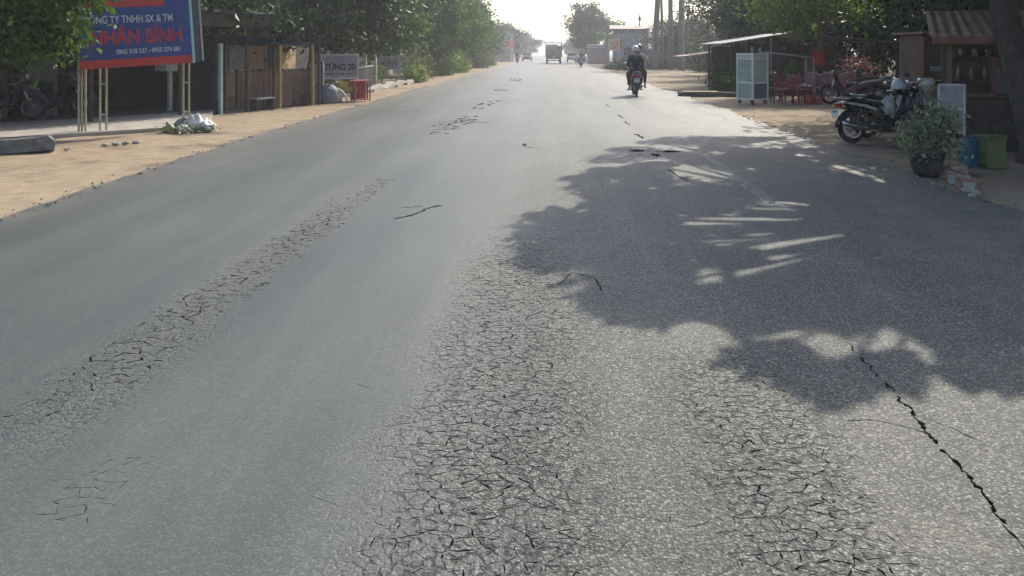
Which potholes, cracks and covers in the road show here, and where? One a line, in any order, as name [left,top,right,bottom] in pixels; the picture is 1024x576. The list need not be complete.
crack [35,457,149,523]
crack [393,205,443,219]
crack [312,228,729,576]
crack [605,104,693,182]
crack [430,78,522,134]
crack [3,179,392,417]
crack [657,353,924,576]
crack [848,343,1024,549]
